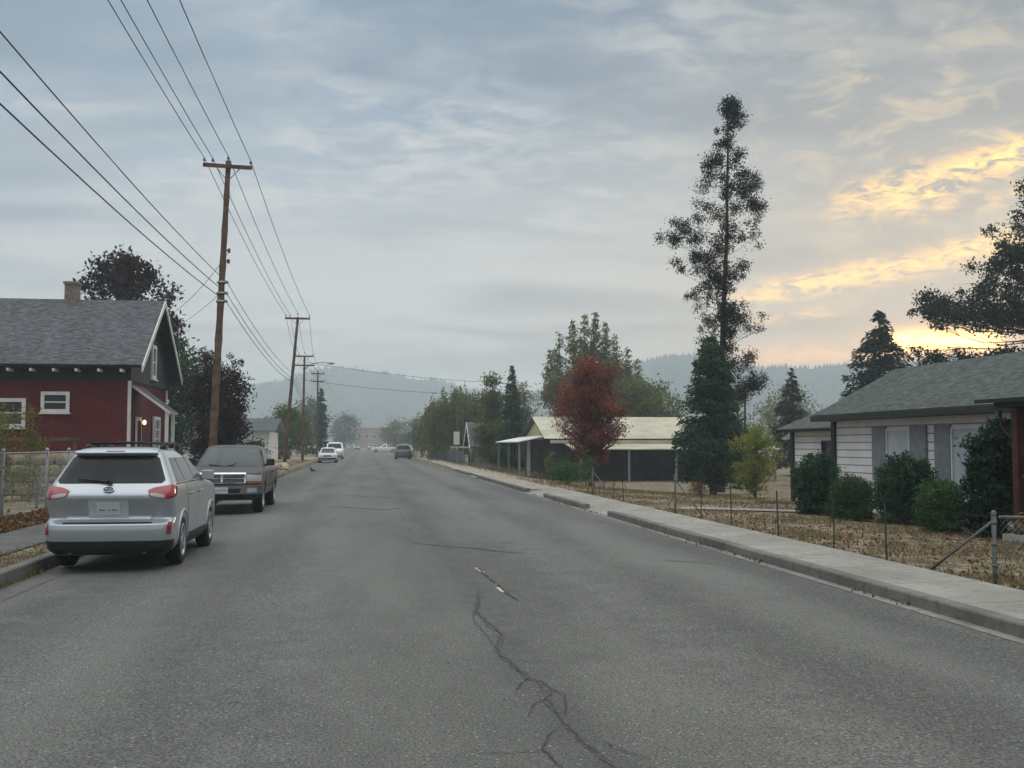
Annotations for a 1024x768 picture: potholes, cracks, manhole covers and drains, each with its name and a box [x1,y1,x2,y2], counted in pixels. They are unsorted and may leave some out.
crack [347,495,651,768]
